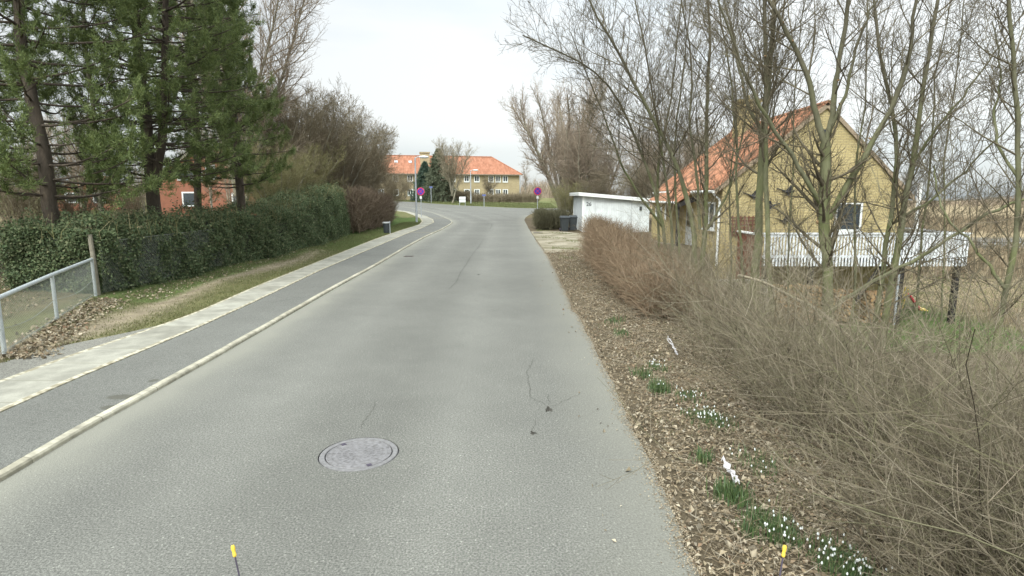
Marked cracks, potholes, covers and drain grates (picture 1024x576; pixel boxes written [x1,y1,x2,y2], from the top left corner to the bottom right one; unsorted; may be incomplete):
crack [519,358,579,414]
manhole cover [318,438,399,472]
